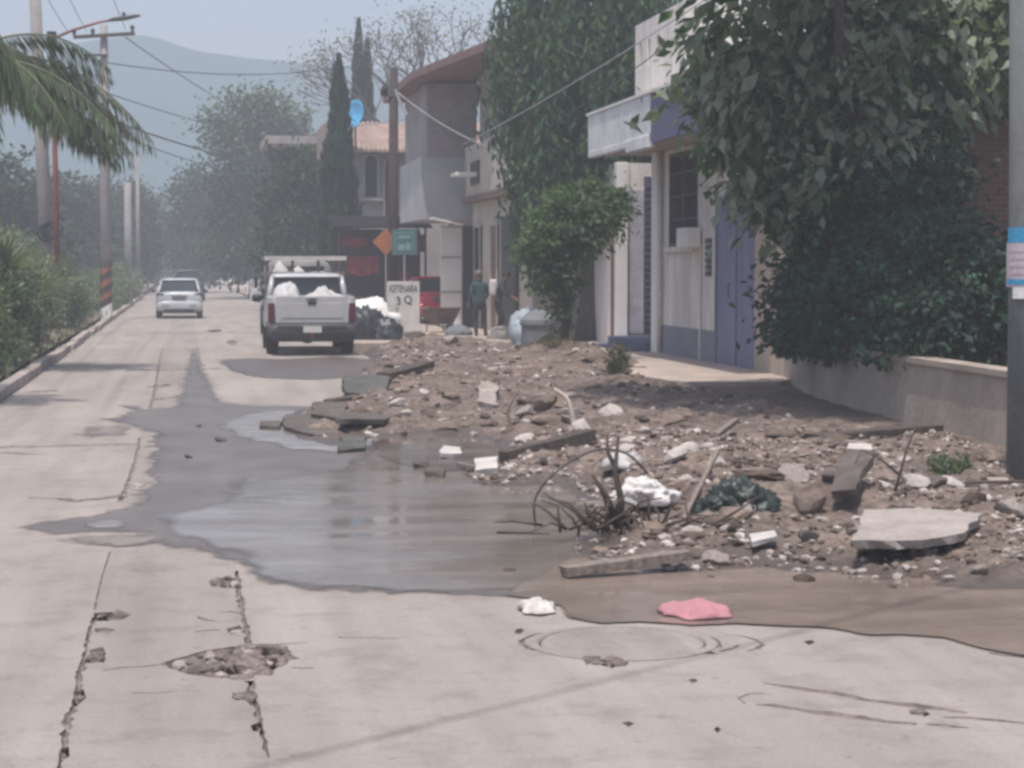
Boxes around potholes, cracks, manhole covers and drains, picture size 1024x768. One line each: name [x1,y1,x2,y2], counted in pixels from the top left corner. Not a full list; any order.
manhole cover [527,626,717,664]
crack [57,553,158,768]
pothole [158,644,300,686]
crack [195,573,298,646]
